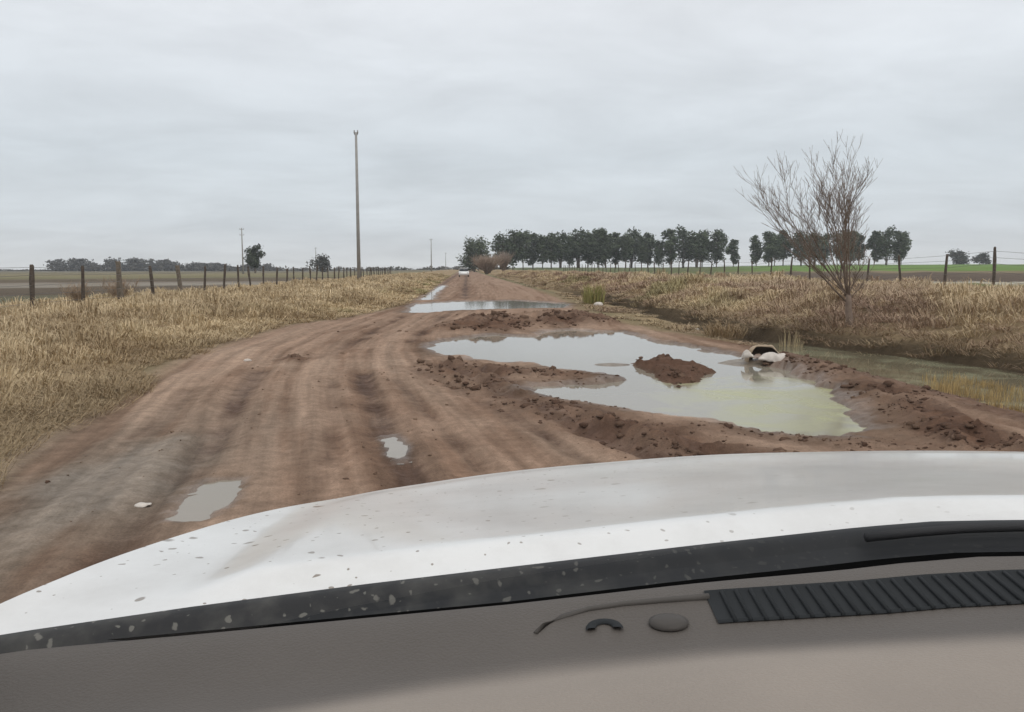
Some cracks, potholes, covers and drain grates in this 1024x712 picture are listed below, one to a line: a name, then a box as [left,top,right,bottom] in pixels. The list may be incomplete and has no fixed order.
pothole [416,327,898,440]
pothole [378,433,416,465]
pothole [158,474,251,523]
pothole [399,299,578,313]
pothole [414,285,449,300]
